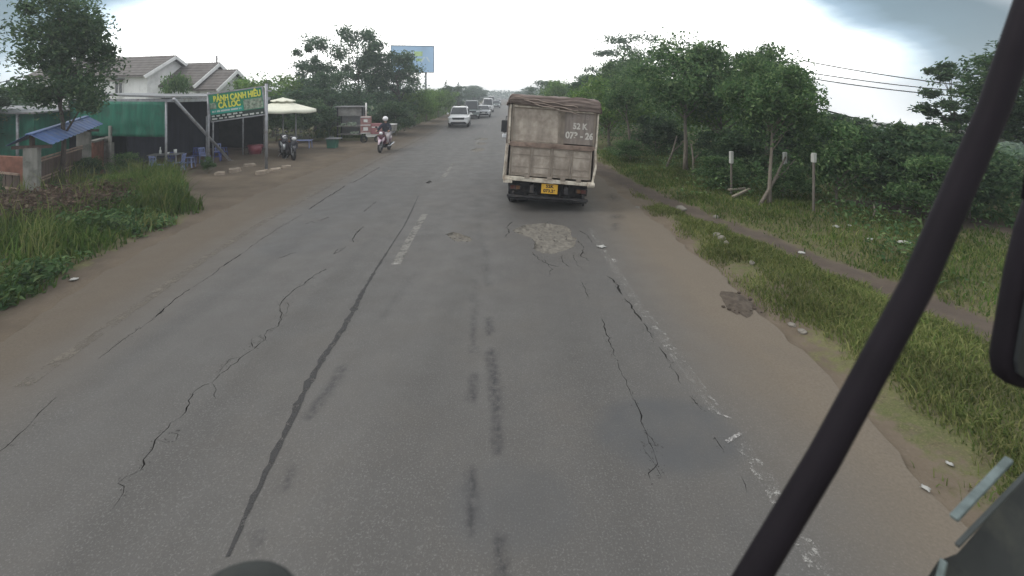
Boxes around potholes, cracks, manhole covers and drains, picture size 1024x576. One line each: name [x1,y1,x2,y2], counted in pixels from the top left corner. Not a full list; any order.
crack [503,222,747,491]
crack [0,169,376,451]
crack [110,269,326,511]
